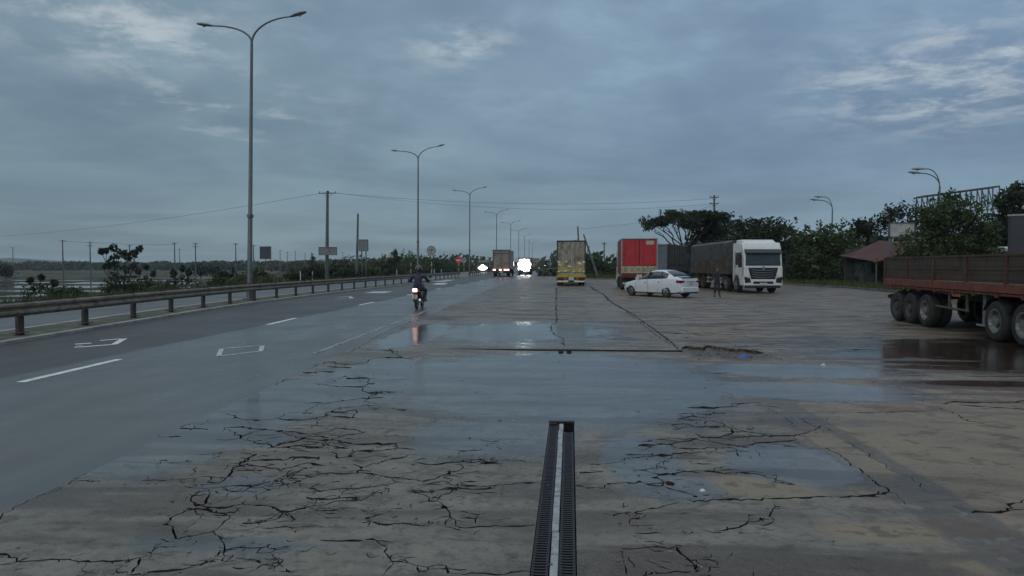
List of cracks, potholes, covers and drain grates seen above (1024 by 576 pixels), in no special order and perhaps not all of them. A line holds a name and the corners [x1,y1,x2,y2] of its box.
crack [548,288,565,346]
pothole [681,345,763,360]
crack [937,400,1024,429]
crack [612,313,706,344]
crack [578,396,922,576]
crack [0,348,542,576]
crack [972,500,1024,514]
